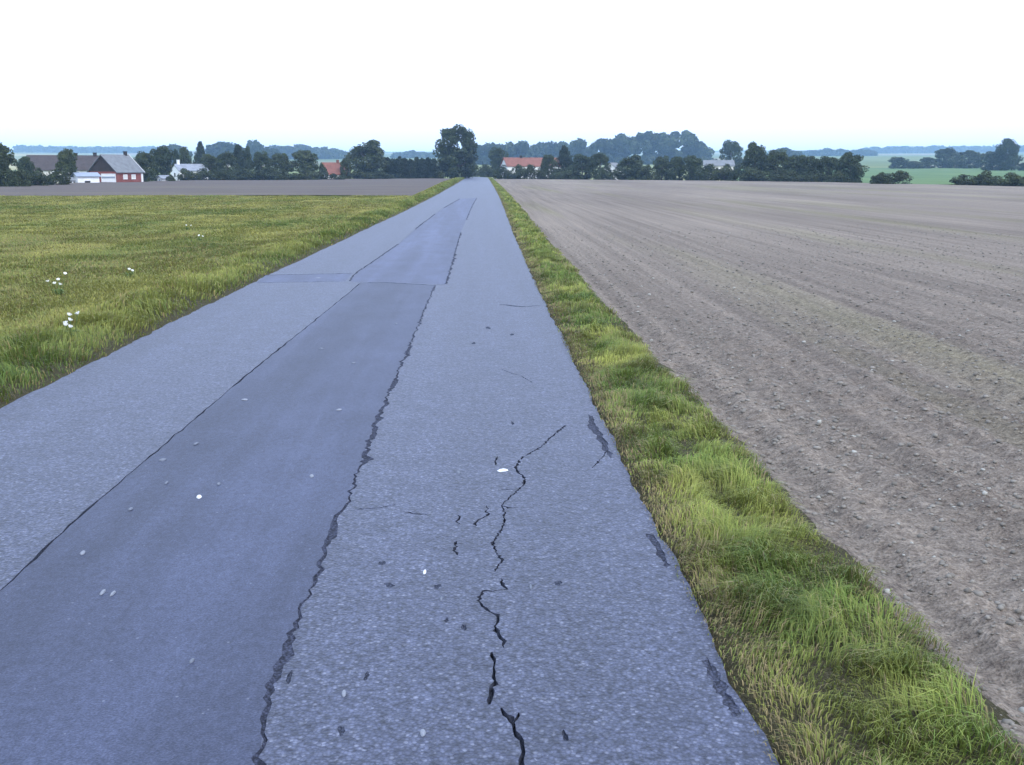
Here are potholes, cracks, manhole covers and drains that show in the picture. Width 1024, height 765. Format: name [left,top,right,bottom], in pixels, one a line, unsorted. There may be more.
crack [453,426,566,765]
crack [0,198,477,765]
